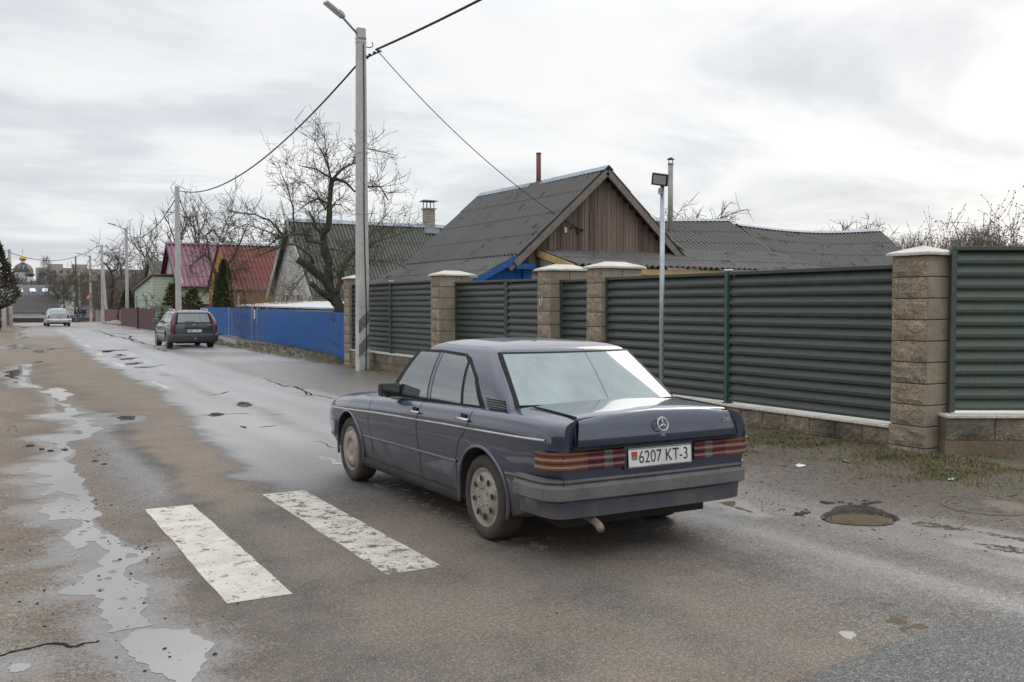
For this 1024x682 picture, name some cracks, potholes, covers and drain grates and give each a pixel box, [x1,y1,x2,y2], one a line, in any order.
crack [0,640,99,657]
manhole cover [941,497,1024,516]
crack [246,377,334,399]
pothole [794,498,899,526]
